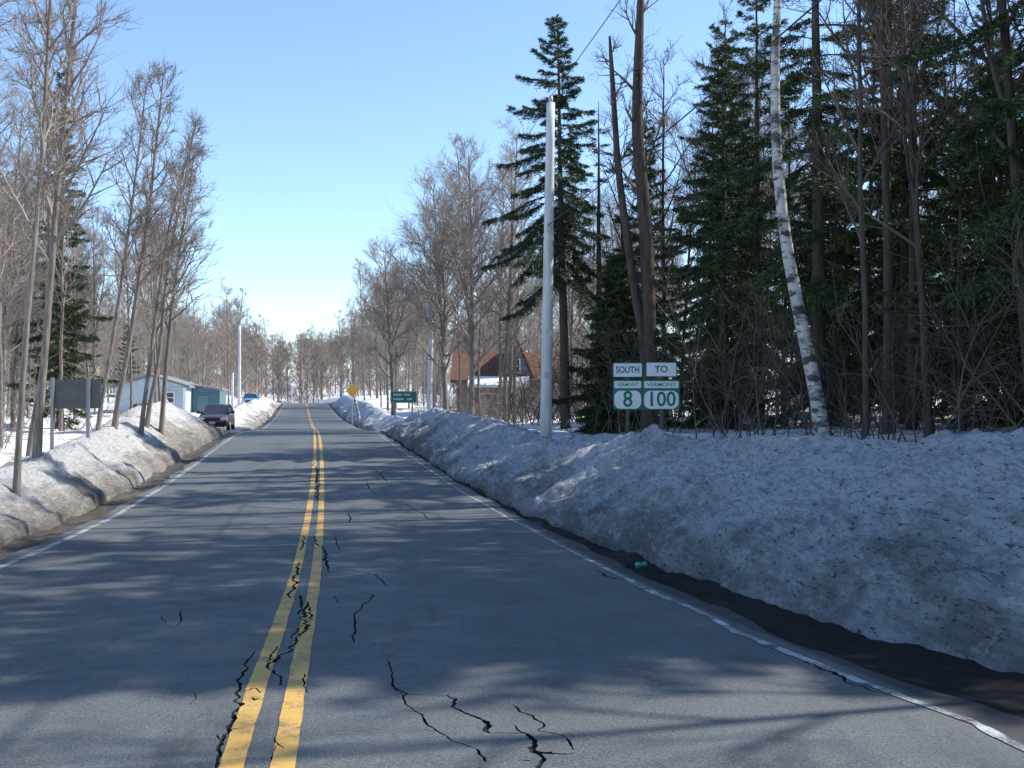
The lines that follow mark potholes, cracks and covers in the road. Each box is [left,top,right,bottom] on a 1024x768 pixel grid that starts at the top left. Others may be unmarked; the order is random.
crack [333,570,388,643]
crack [313,463,321,500]
crack [805,662,878,693]
crack [215,512,352,768]
crack [386,658,574,768]
